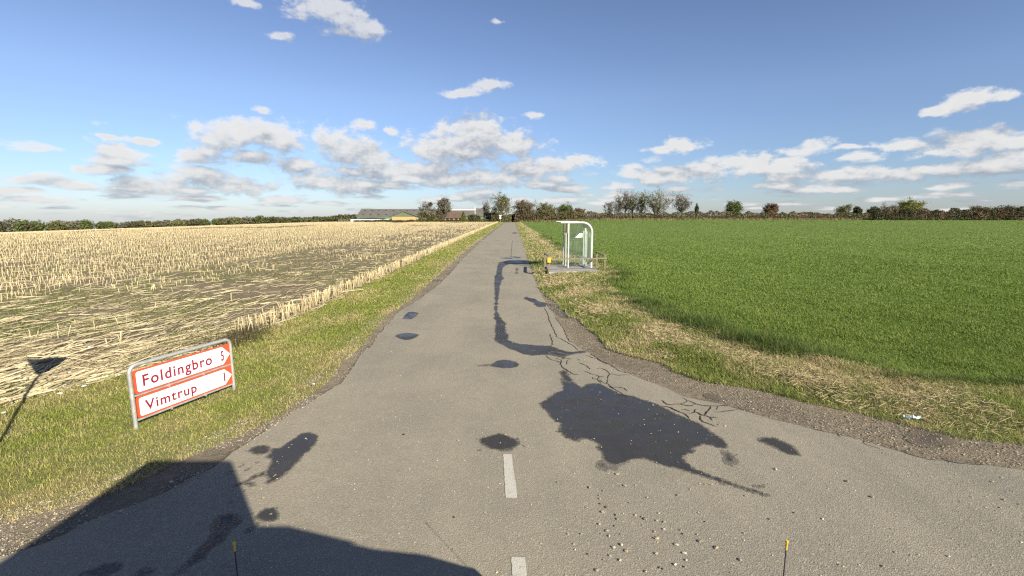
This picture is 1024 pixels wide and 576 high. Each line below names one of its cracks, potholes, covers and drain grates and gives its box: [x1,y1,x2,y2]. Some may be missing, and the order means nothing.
crack [662,398,750,426]
crack [545,309,626,396]
